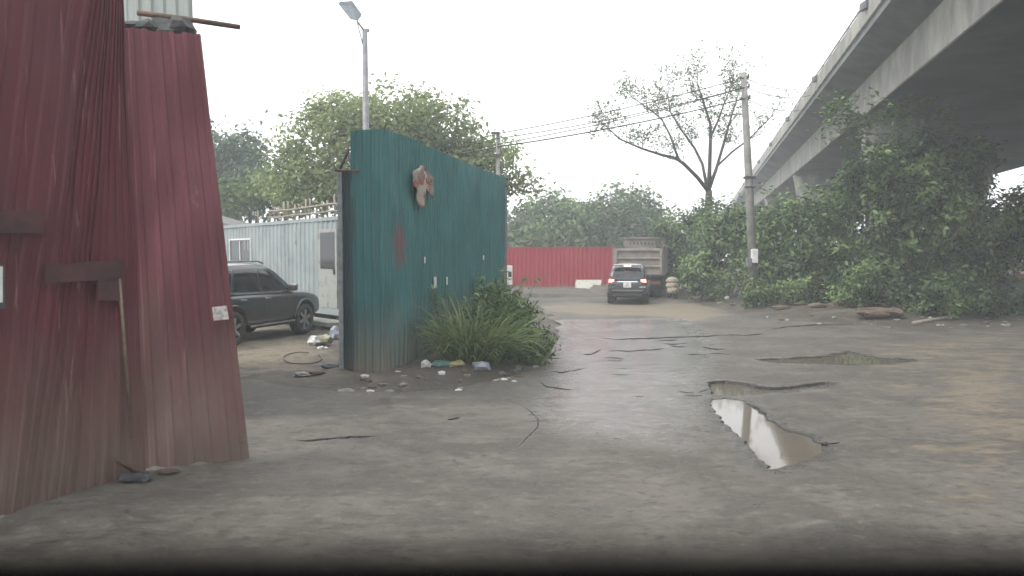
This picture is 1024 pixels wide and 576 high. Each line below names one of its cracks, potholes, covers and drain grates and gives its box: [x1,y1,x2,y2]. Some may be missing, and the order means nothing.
pothole [707,381,831,395]
pothole [709,398,829,471]
pothole [757,352,910,365]
crack [539,324,846,390]
